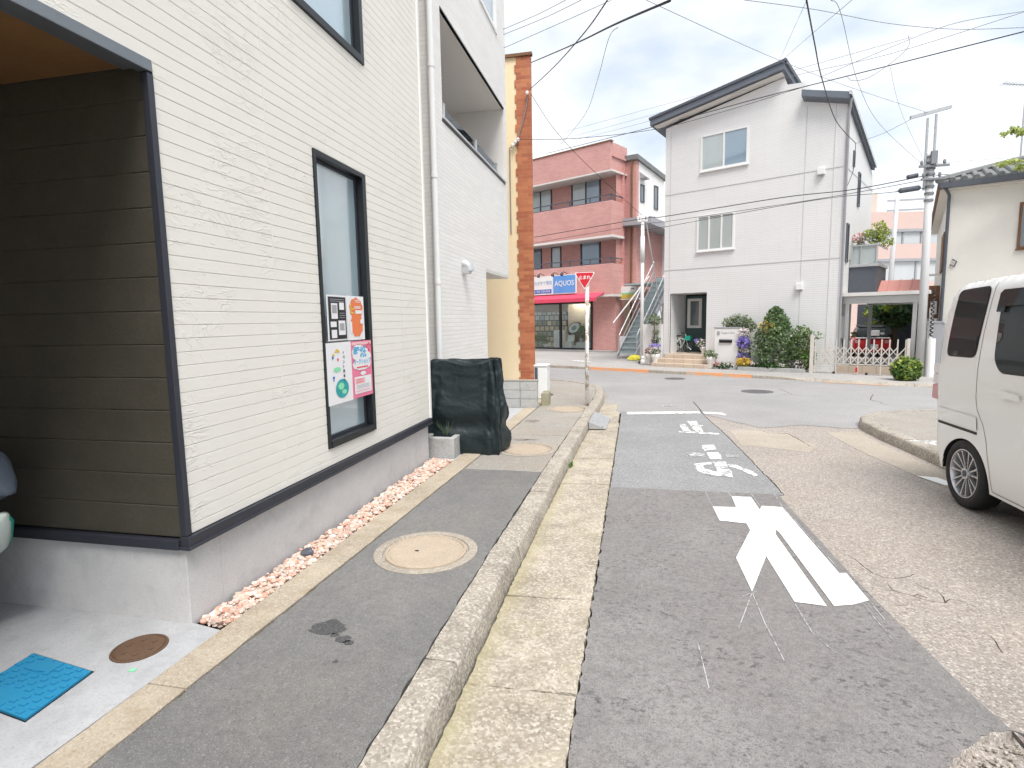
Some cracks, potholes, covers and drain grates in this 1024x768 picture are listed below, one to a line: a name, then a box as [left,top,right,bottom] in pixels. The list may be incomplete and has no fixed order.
manhole cover [500,442,557,457]
manhole cover [109,634,169,663]
crack [848,555,976,607]
manhole cover [373,531,478,575]
